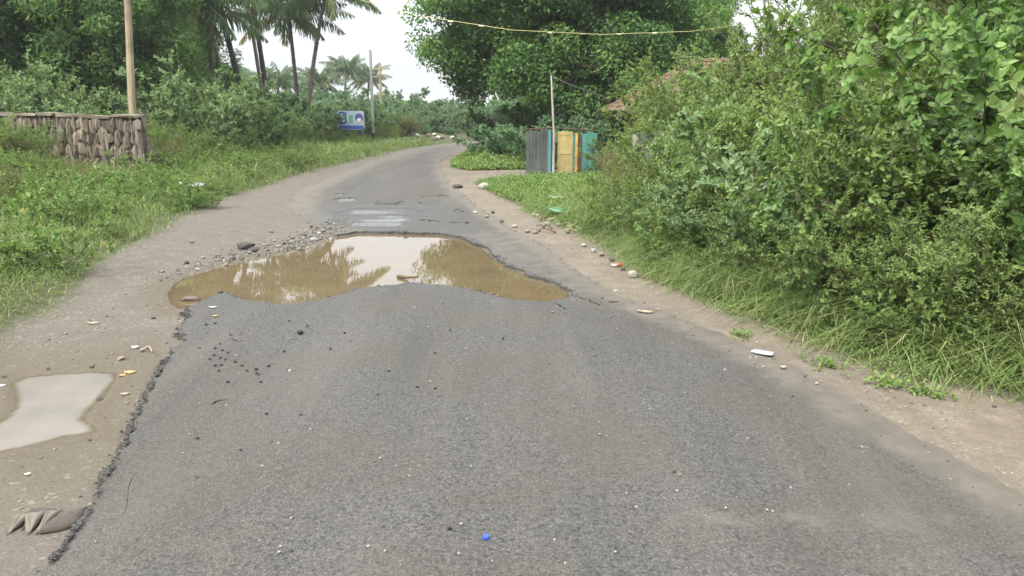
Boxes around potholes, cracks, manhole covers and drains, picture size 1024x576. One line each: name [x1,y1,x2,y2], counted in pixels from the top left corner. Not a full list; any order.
pothole [158,230,576,311]
pothole [332,207,425,227]
